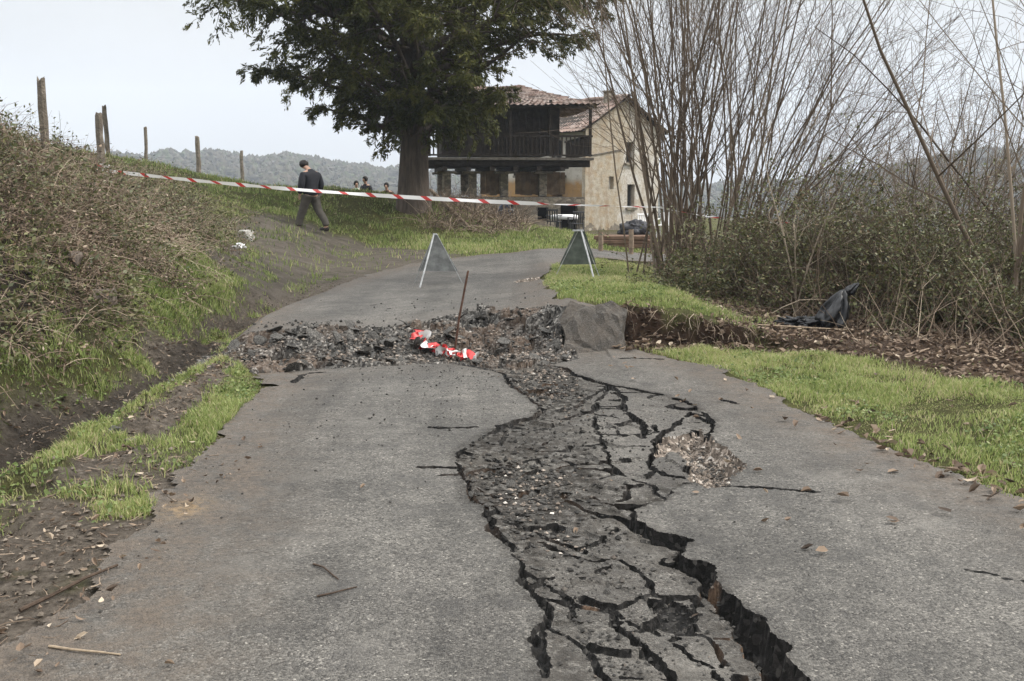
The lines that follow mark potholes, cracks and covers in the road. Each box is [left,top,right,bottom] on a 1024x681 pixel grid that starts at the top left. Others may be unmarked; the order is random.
pothole [654,431,747,488]
crack [964,569,1024,583]
crack [167,301,821,681]
